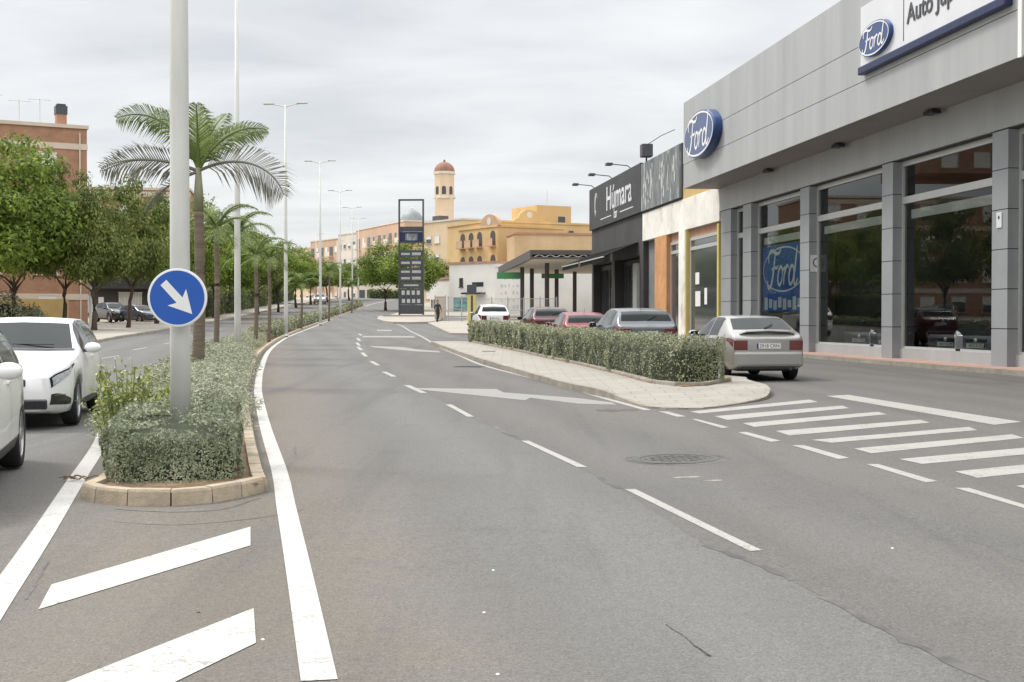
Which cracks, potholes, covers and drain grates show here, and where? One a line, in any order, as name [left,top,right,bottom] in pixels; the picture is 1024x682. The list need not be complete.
crack [666,624,711,656]
manhole cover [631,453,720,464]
